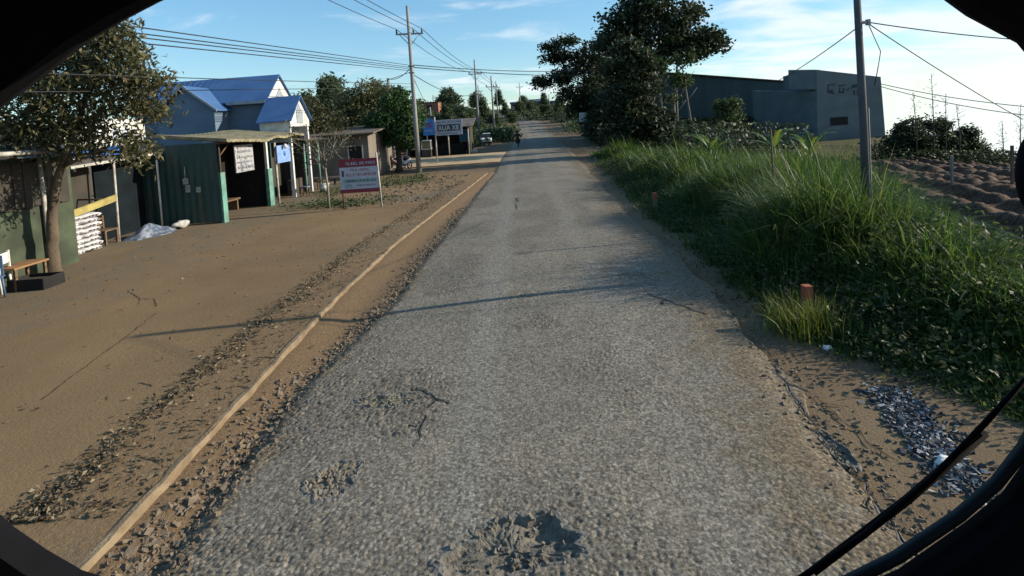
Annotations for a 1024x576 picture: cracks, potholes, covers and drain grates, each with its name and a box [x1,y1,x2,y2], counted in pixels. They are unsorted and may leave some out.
pothole [300,457,365,504]
crack [647,294,706,314]
crack [408,388,447,447]
pothole [428,508,595,576]
